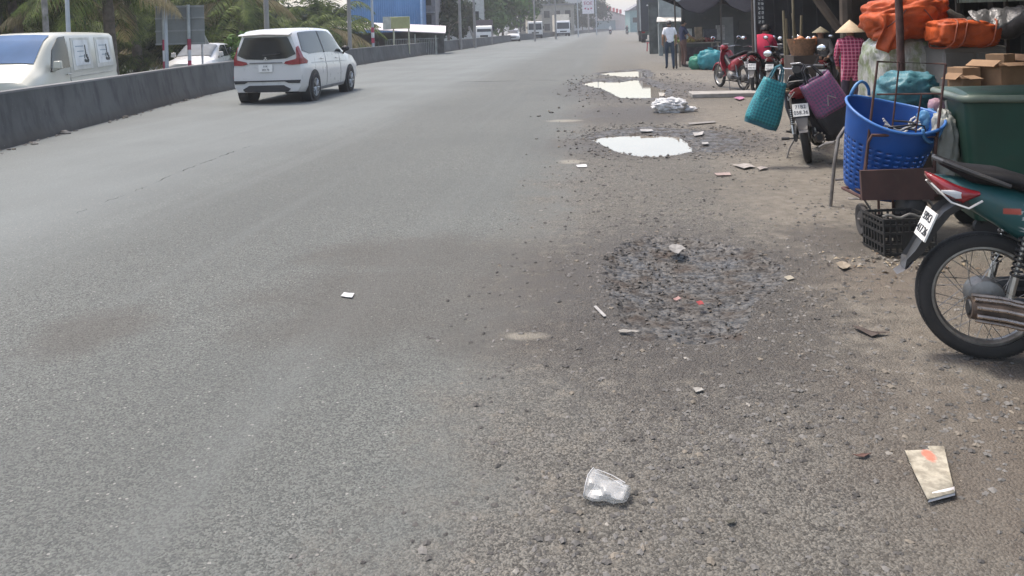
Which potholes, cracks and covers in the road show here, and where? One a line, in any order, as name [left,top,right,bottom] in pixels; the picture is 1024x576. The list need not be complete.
pothole [591,69,654,77]
pothole [598,235,789,345]
pothole [587,126,743,157]
pothole [576,78,675,99]
